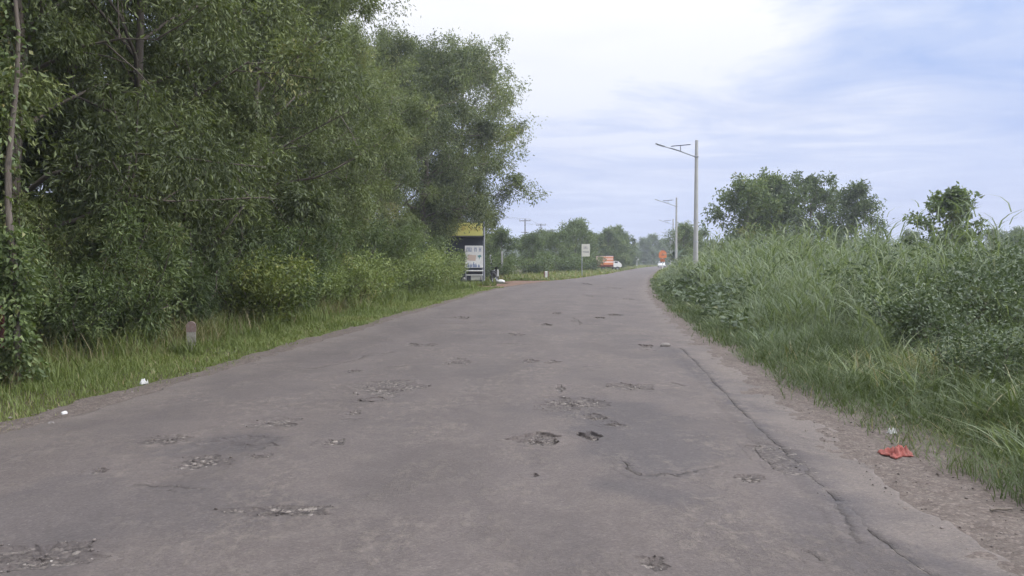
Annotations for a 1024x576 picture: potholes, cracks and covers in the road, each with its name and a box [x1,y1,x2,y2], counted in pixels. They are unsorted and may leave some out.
pothole [590,419,635,429]
crack [798,548,834,563]
pothole [198,501,344,521]
pothole [571,412,615,425]
pothole [158,452,246,473]
pothole [599,382,660,392]
pothole [531,395,621,413]
pothole [722,471,779,487]
pothole [341,379,434,402]
pothole [495,429,569,449]
pothole [235,415,310,430]
pothole [618,550,687,576]
